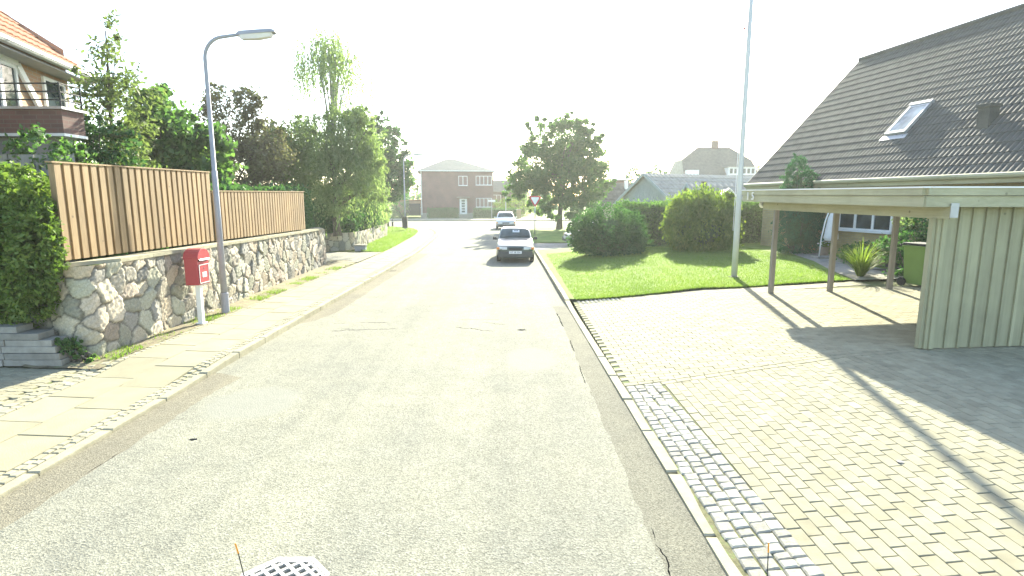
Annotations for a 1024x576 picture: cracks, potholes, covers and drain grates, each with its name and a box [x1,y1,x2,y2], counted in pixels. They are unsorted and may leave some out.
crack [651,528,671,576]
